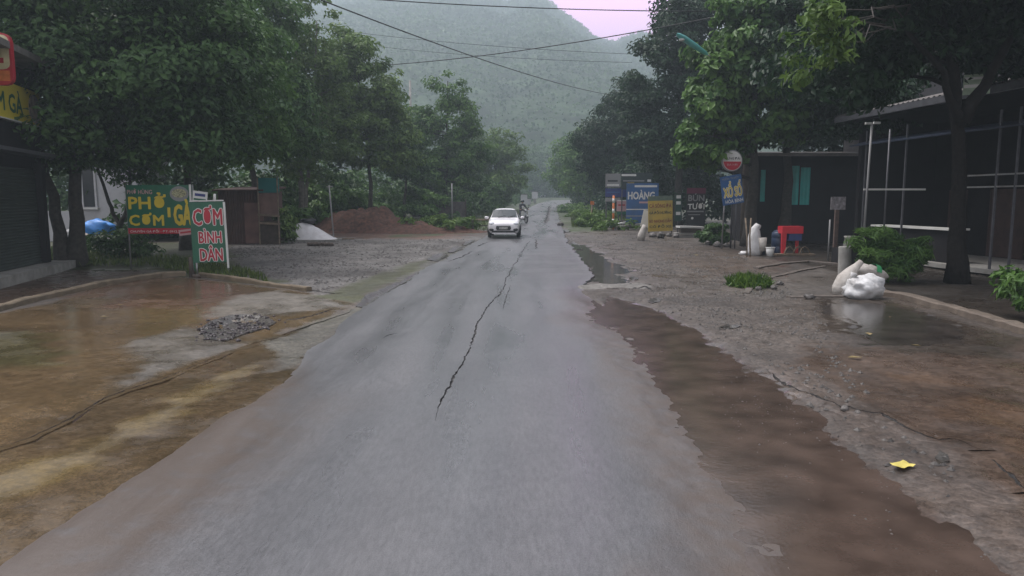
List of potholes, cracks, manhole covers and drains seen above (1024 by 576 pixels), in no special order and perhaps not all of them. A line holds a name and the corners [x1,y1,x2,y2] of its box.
crack [435,238,561,420]
